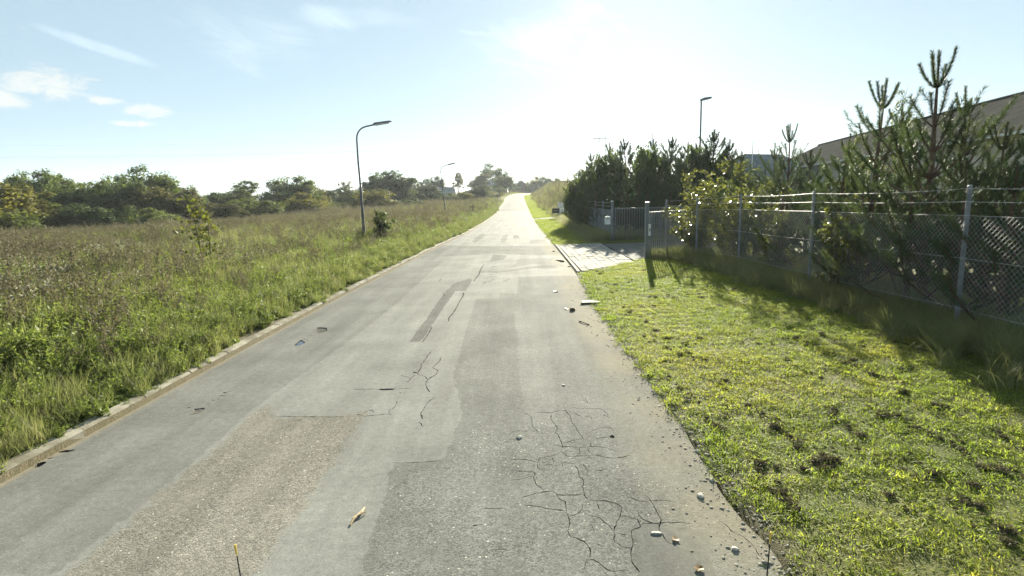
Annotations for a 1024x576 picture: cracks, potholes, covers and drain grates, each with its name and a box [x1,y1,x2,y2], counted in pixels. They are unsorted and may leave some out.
crack [473,400,690,572]
crack [282,265,509,427]
